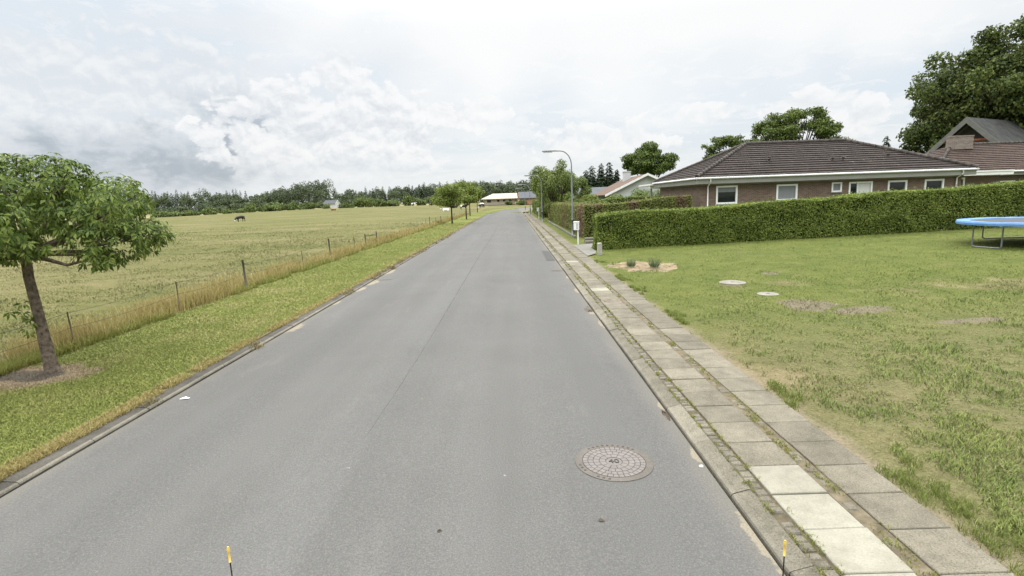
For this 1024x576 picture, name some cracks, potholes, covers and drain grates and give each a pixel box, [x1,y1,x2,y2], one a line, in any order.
manhole cover [575,444,654,482]
